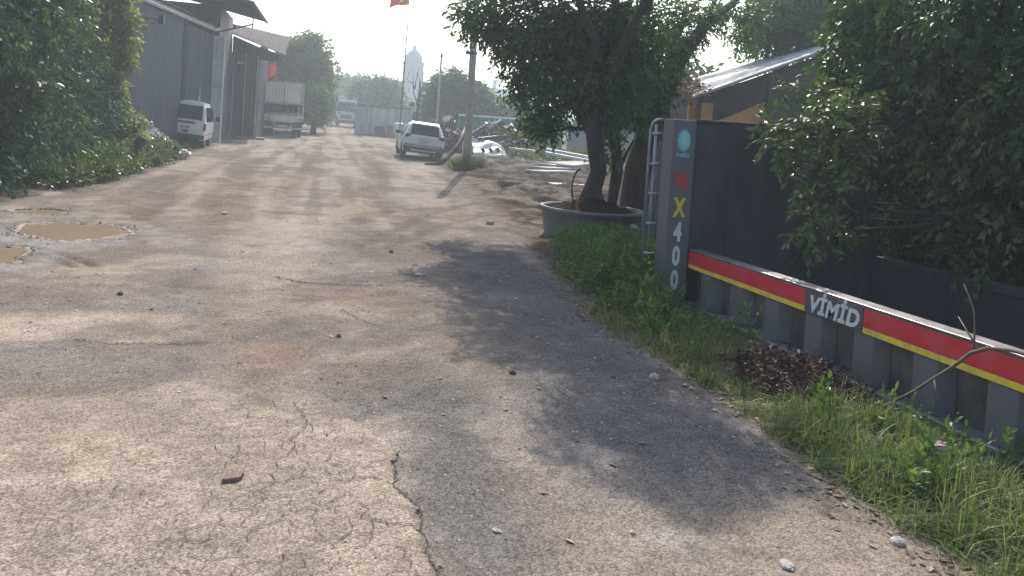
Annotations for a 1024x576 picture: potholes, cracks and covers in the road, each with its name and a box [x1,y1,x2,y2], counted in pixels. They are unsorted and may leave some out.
pothole [3,207,70,215]
pothole [1,218,147,242]
crack [0,400,440,576]
pothole [0,243,50,264]
